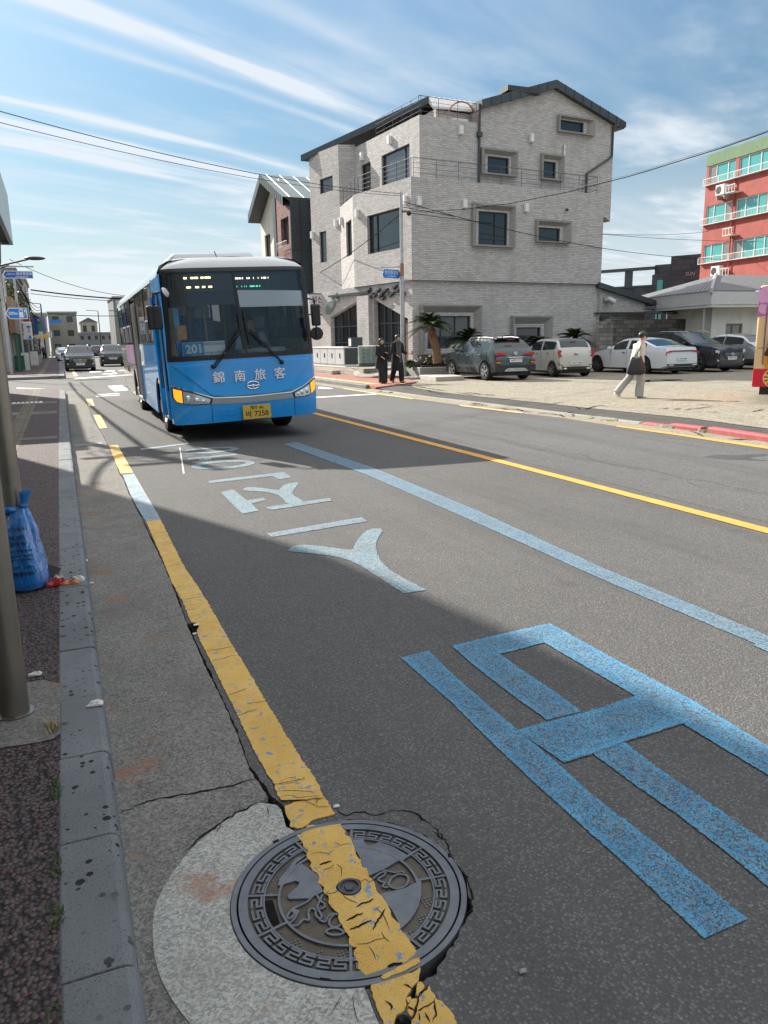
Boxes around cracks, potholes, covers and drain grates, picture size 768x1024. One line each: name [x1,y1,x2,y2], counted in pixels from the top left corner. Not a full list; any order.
crack [385,984,437,1021]
manhole cover [230,820,467,990]
crack [217,777,474,915]
